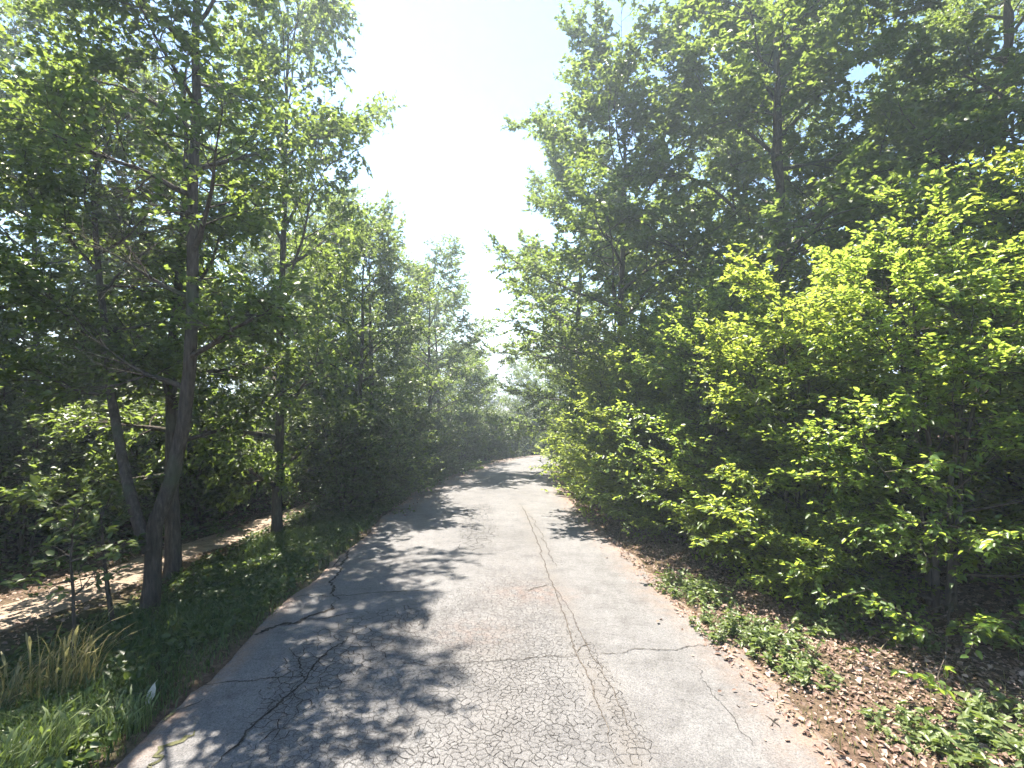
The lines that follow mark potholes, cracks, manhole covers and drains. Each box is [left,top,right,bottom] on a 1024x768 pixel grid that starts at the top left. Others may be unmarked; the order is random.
crack [147,550,706,768]
